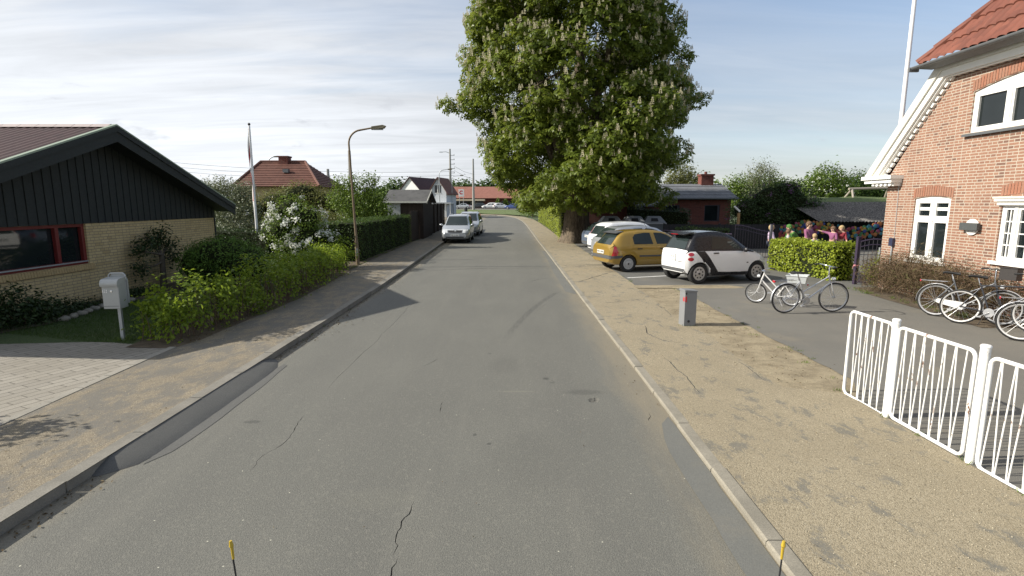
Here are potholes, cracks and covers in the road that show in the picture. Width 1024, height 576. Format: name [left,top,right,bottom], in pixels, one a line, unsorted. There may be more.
crack [390,502,414,576]
crack [645,326,700,393]
